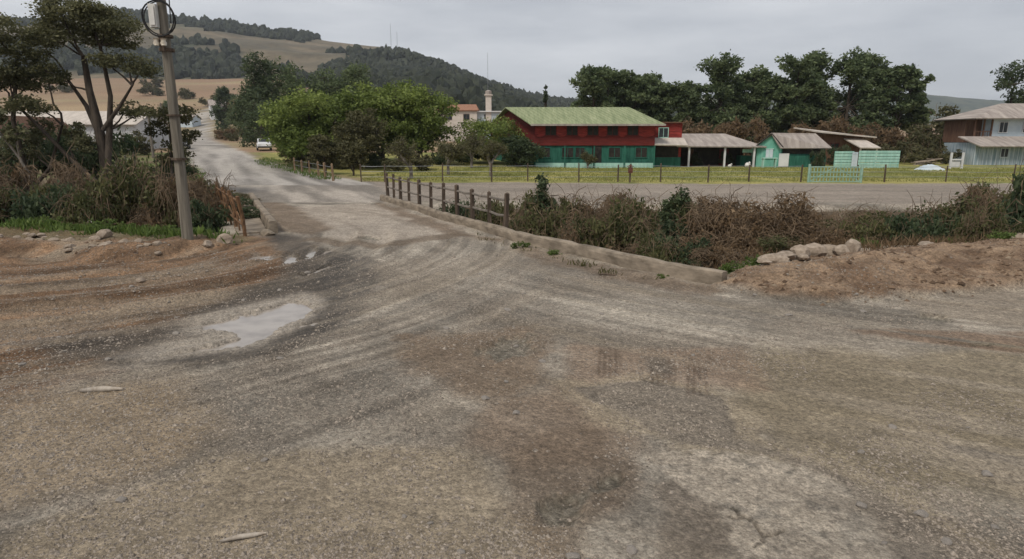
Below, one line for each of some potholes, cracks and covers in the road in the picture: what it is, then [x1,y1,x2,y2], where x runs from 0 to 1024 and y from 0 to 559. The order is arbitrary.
pothole [278,248,300,266]
pothole [122,292,329,366]
crack [725,506,790,549]
pothole [302,245,321,258]
